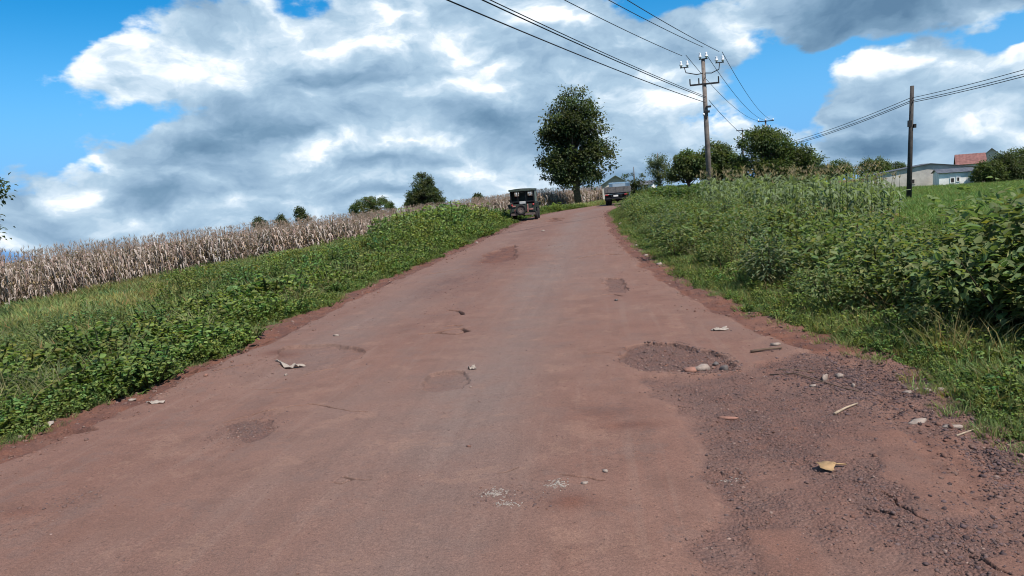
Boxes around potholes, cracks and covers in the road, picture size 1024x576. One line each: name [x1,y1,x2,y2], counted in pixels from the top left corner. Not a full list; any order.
pothole [215,415,282,446]
pothole [413,368,476,393]
crack [554,471,613,484]
pothole [596,277,634,294]
crack [854,486,938,527]
pothole [609,340,746,377]
pothole [470,244,525,265]
pothole [270,342,375,373]
crack [323,474,380,487]
